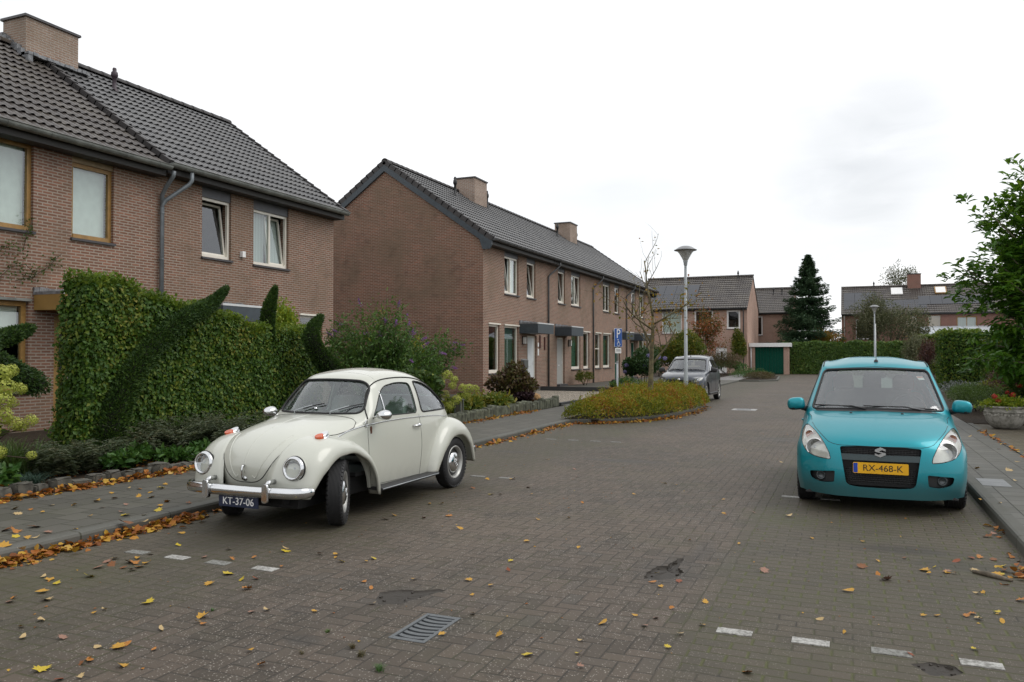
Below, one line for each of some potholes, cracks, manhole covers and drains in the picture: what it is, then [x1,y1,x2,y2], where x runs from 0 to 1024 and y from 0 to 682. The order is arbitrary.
drain grate [388,613,461,644]
pothole [643,558,684,580]
pothole [376,589,445,605]
pothole [912,662,963,677]
